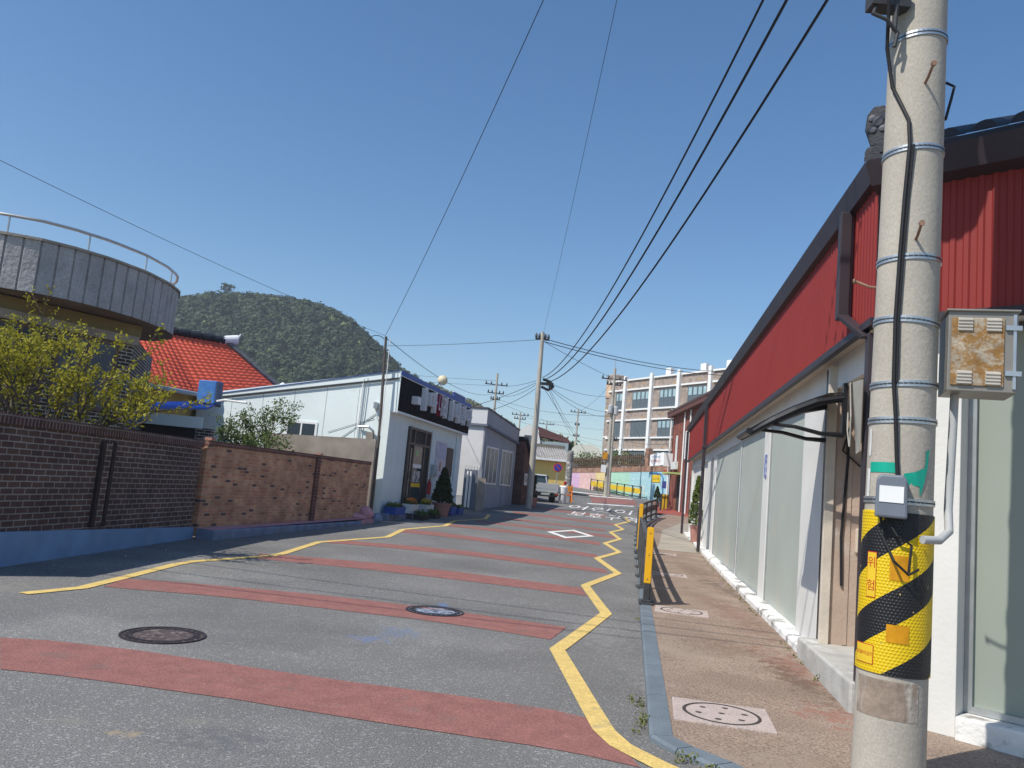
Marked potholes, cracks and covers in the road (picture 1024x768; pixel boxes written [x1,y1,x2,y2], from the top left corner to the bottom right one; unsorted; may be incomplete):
utility cover [672,697,778,735]
utility cover [654,605,709,618]
manhole cover [118,626,207,644]
manhole cover [406,605,464,617]
